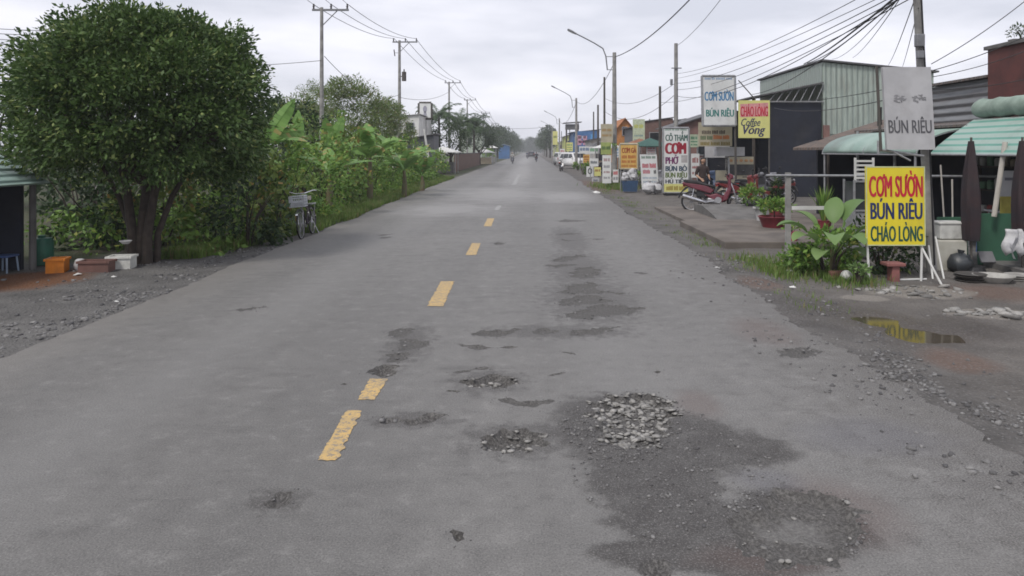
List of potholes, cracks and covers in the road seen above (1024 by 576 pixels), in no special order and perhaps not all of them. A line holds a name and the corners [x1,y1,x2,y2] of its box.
pothole [451,371,523,391]
pothole [372,410,459,428]
pothole [766,346,830,359]
pothole [252,488,301,511]
pothole [359,362,405,379]
pothole [577,389,690,454]
pothole [477,424,563,457]
pothole [710,483,881,575]
